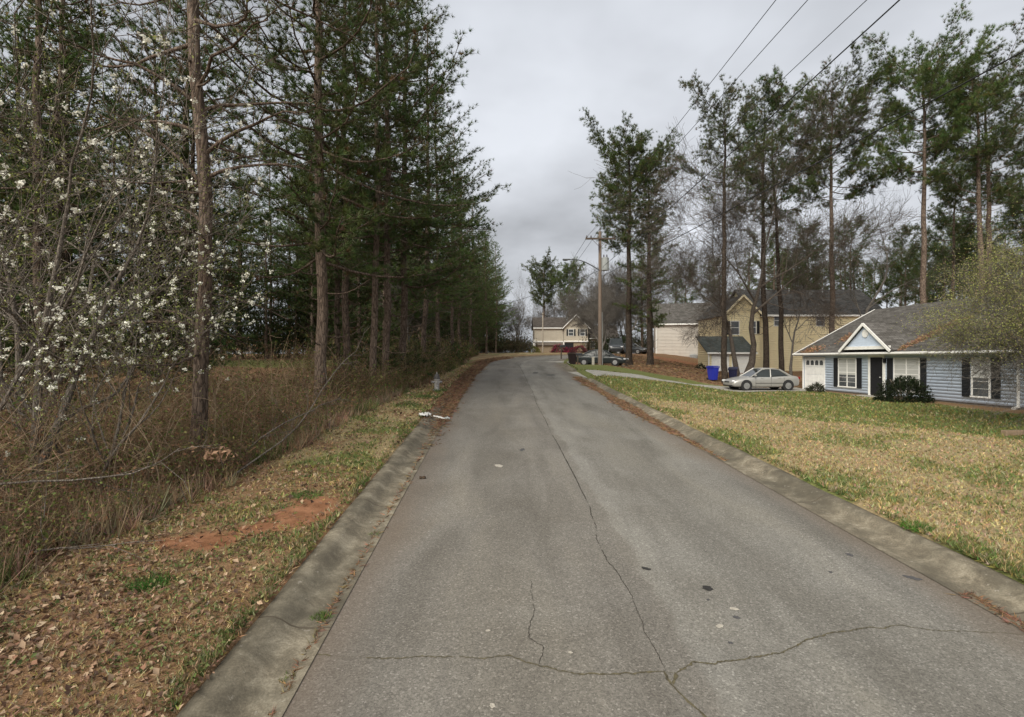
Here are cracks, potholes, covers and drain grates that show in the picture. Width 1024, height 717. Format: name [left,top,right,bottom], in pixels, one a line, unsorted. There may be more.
crack [318,364,1019,717]
